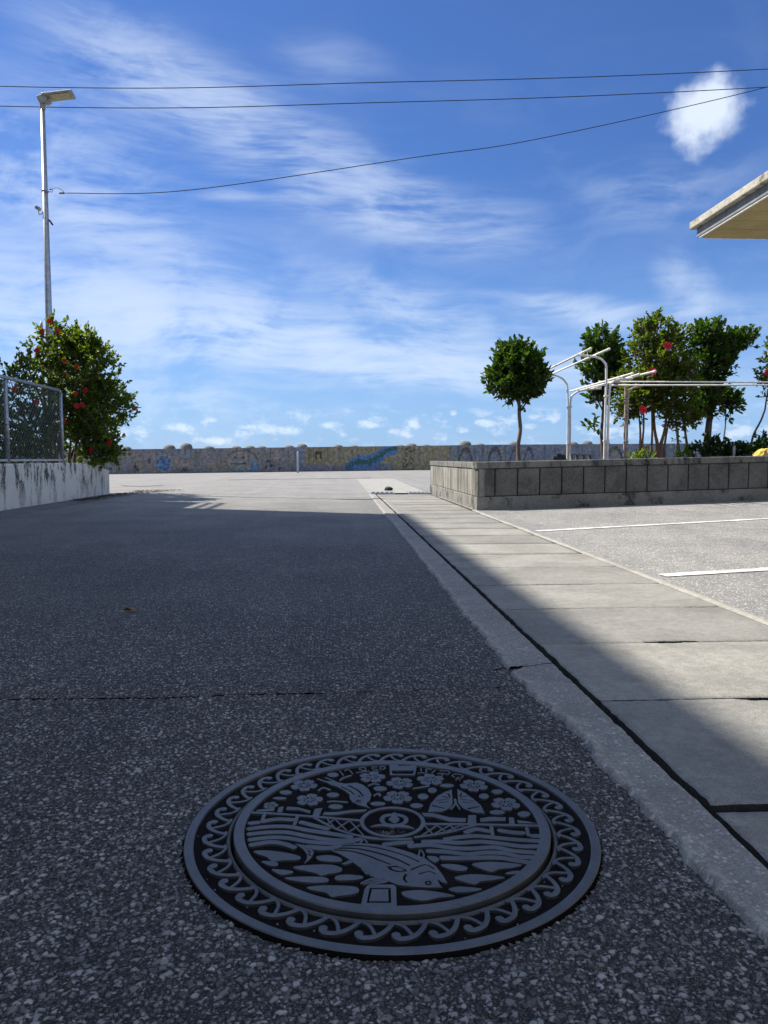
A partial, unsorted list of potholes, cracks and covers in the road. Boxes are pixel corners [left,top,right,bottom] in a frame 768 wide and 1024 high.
manhole cover [180,749,604,962]
crack [0,687,505,701]
